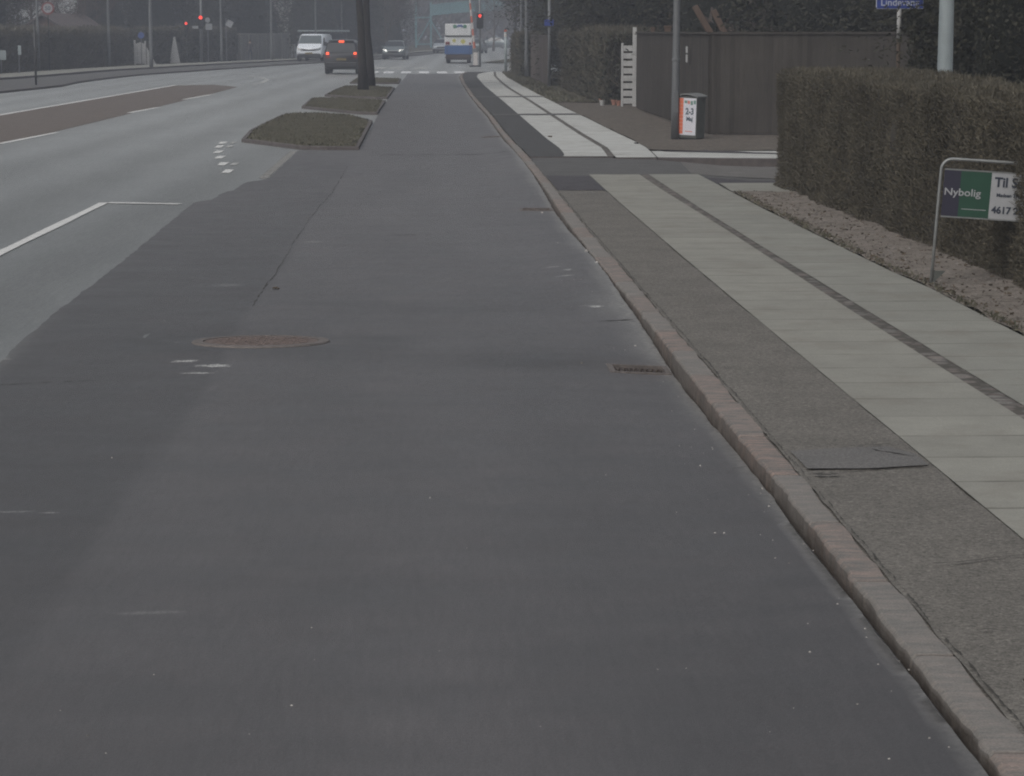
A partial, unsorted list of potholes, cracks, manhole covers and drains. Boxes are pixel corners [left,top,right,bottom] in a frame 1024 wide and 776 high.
drain grate [606,363,672,375]
manhole cover [192,335,330,348]
